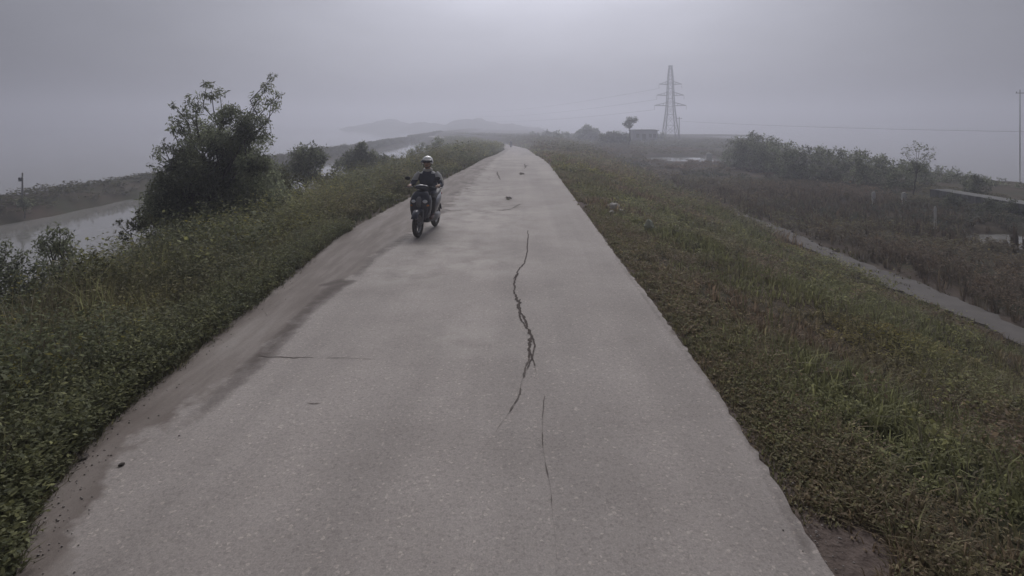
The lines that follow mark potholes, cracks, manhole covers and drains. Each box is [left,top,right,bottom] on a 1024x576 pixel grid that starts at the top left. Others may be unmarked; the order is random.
crack [542,396,557,555]
crack [480,231,536,452]
